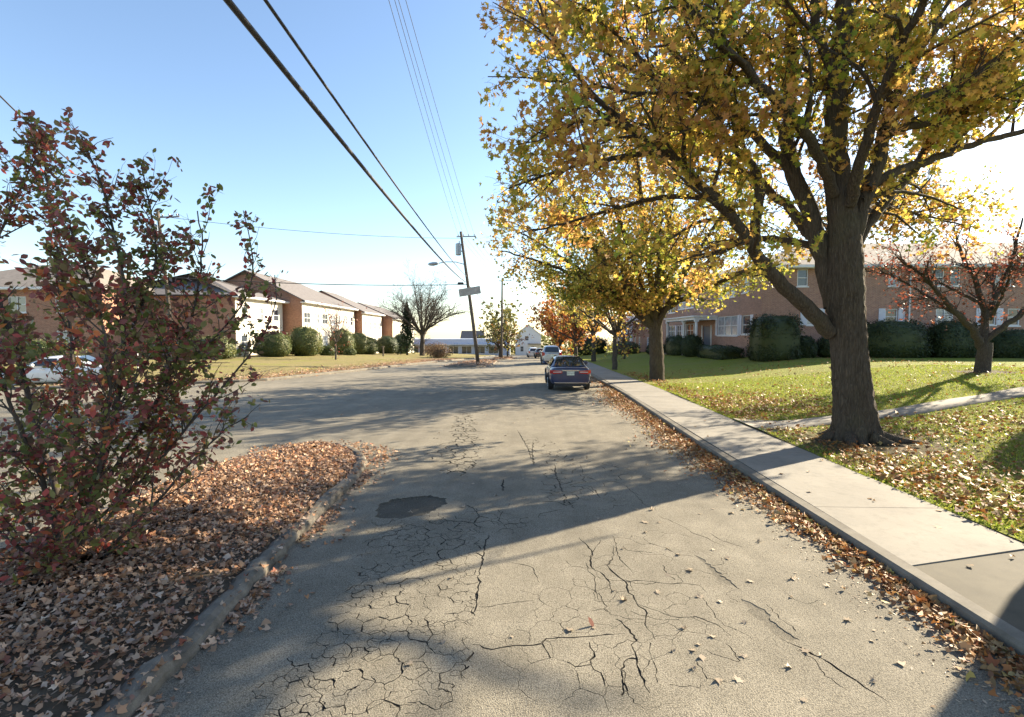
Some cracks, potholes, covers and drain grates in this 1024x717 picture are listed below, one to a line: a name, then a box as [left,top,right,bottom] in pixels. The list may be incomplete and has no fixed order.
crack [425,413,483,476]
crack [242,431,751,717]
